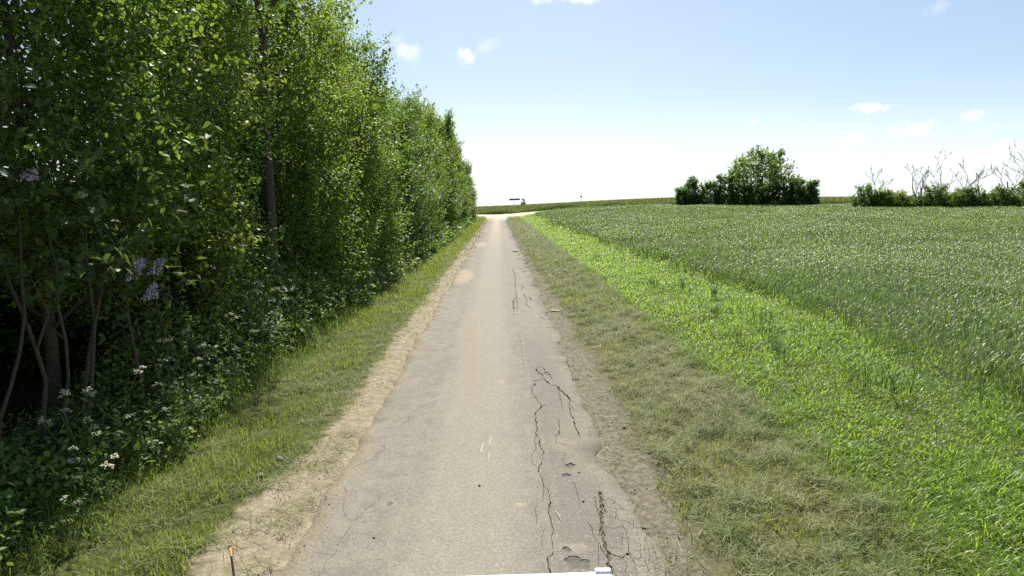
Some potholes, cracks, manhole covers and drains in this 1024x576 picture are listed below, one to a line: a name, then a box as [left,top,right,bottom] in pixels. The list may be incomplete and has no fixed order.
crack [512,268,545,320]
crack [573,482,654,576]
crack [519,334,580,573]
pothole [564,556,590,570]
